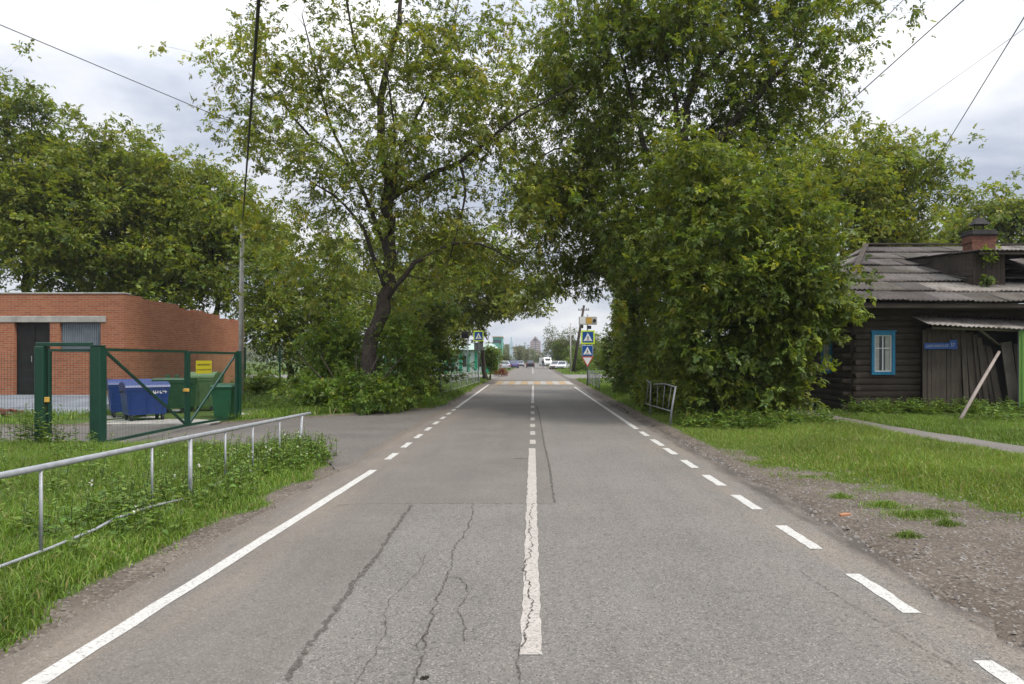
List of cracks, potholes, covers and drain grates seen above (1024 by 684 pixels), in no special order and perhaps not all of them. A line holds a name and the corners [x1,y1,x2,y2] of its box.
crack [345,407,556,684]
crack [284,505,414,682]
